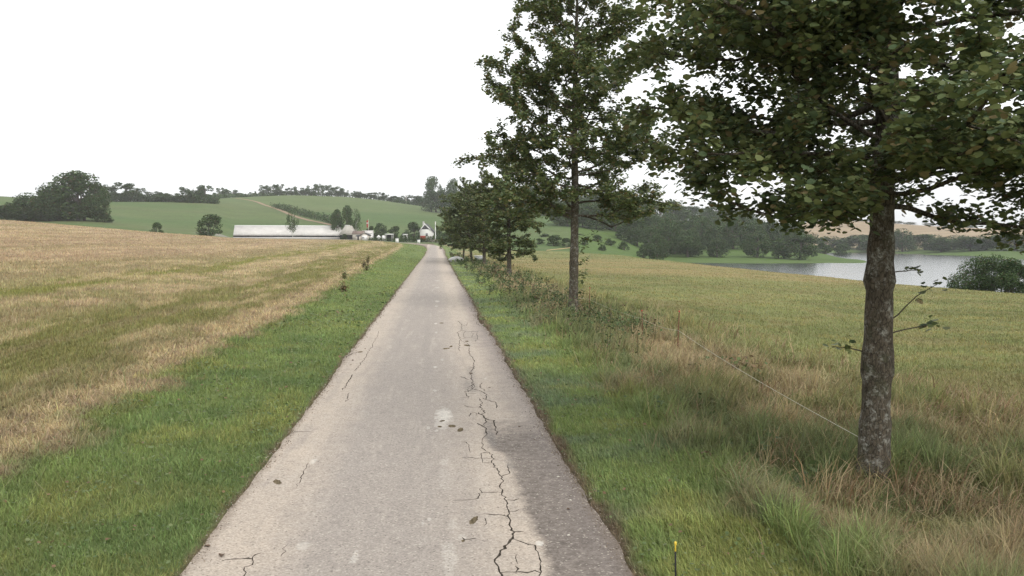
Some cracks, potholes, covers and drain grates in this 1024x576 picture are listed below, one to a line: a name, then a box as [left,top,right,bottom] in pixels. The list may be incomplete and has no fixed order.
crack [457,321,542,576]
crack [221,553,260,576]
